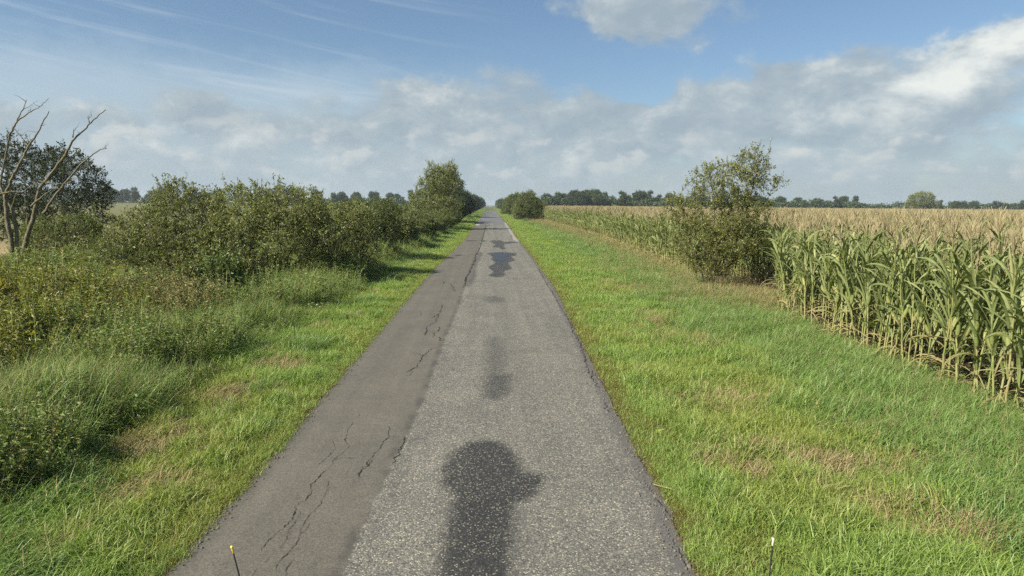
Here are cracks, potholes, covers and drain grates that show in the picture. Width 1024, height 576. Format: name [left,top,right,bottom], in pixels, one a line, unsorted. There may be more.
crack [252,424,358,575]
crack [358,430,406,478]
